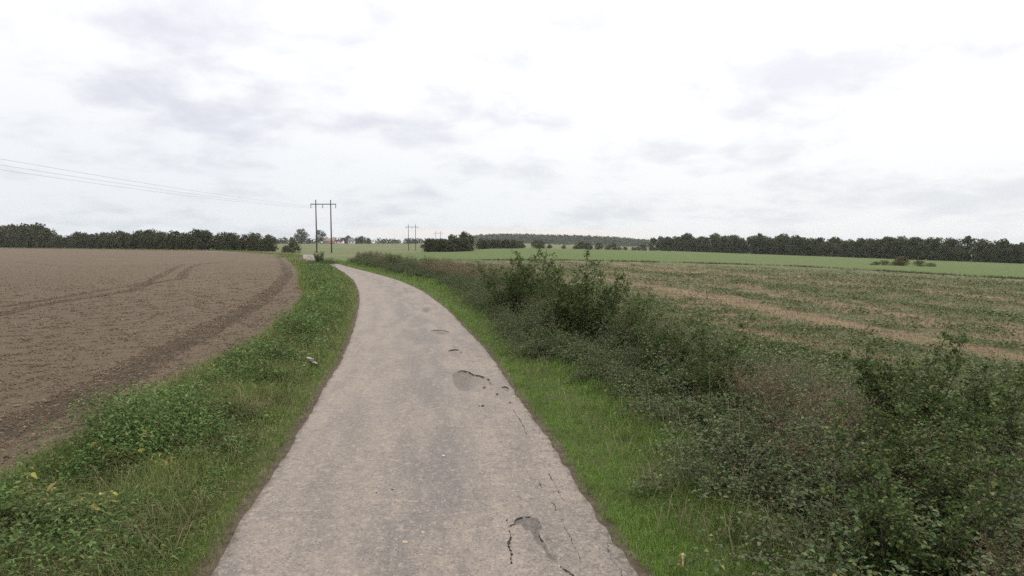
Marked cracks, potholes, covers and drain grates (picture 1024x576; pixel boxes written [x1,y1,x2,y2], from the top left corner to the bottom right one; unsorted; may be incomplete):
pothole [452,370,491,391]
pothole [508,516,559,563]
crack [539,473,581,576]
